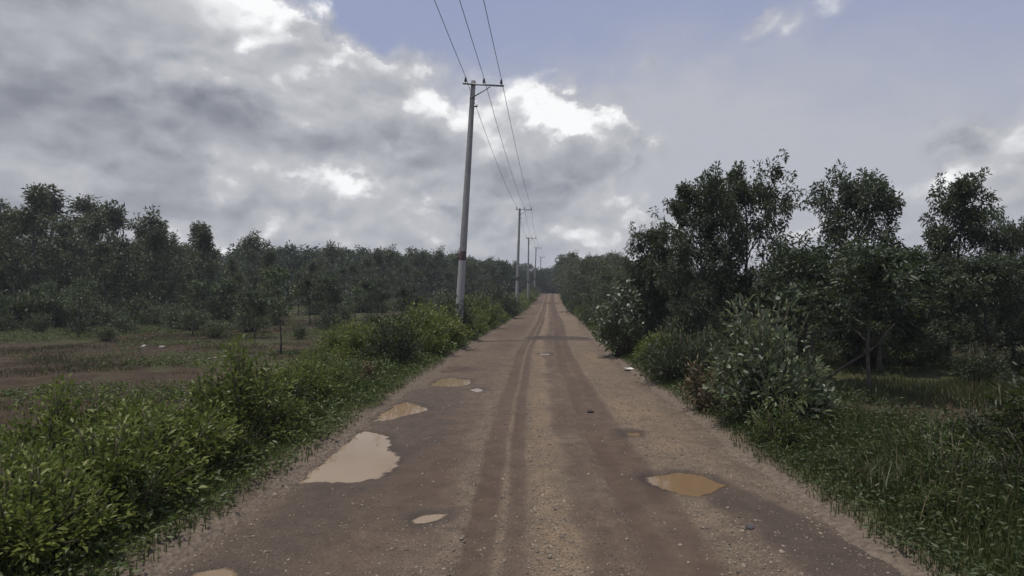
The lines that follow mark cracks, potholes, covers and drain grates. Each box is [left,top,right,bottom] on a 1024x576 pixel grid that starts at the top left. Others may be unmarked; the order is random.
pothole [407,511,453,525]
pothole [428,377,474,387]
pothole [297,429,409,485]
pothole [370,401,434,422]
pothole [637,469,729,497]
pothole [184,561,250,576]
